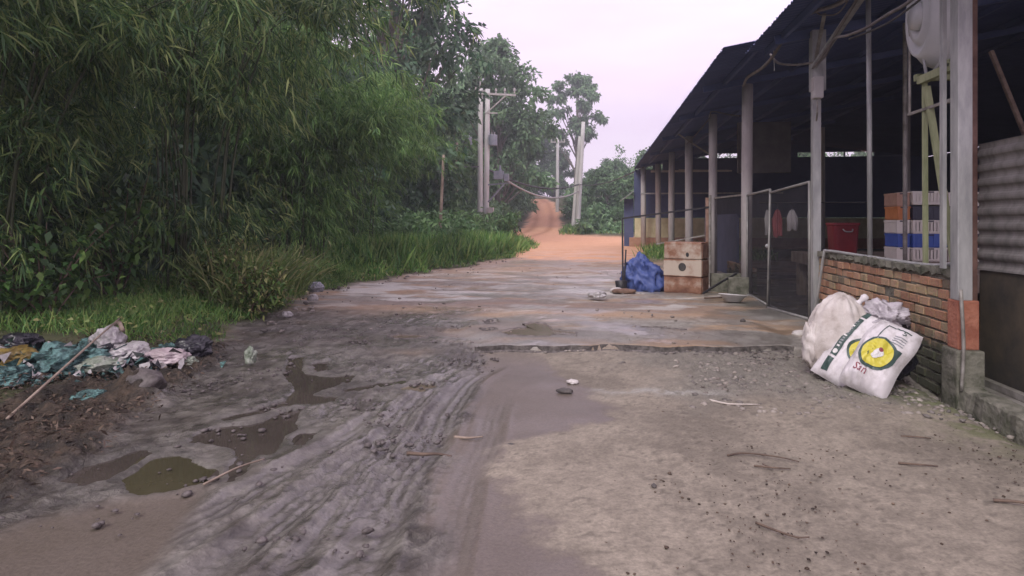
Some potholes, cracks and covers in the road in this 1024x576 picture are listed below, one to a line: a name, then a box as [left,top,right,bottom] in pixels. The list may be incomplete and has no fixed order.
pothole [499,322,578,337]
